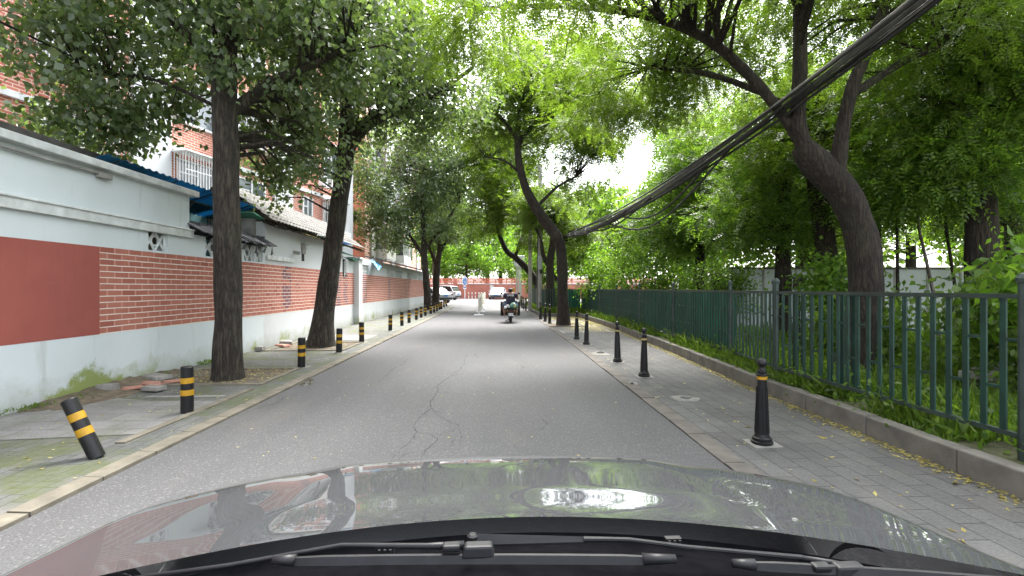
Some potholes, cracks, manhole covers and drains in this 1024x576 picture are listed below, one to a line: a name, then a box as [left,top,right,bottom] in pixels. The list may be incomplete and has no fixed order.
crack [390,354,478,461]
